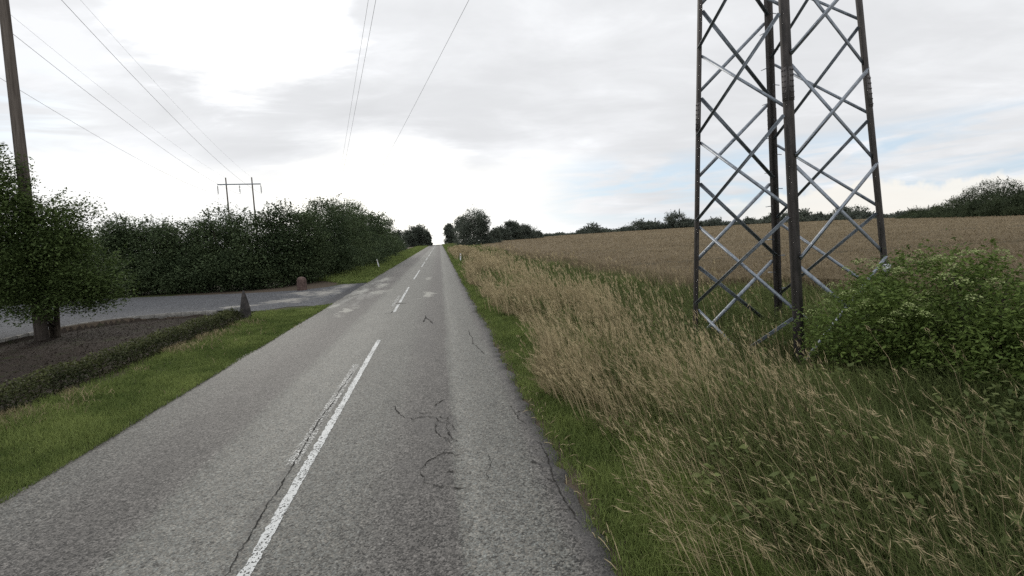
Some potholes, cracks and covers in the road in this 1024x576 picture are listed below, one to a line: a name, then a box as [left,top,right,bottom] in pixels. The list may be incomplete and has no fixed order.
crack [530,440,580,523]
crack [391,400,459,489]
